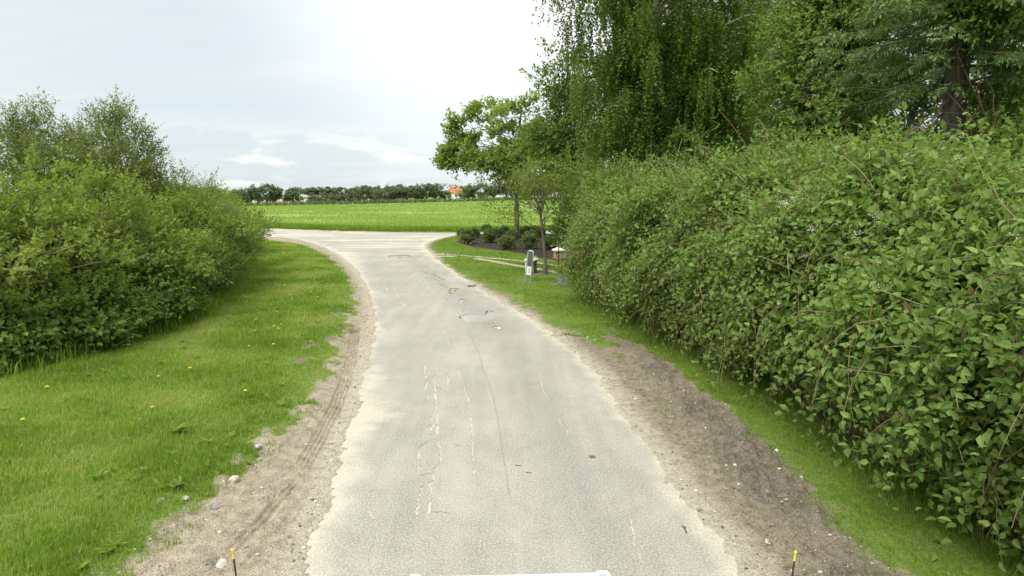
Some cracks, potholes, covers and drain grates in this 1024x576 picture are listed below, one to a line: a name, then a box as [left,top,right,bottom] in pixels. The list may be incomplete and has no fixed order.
crack [529,370,572,434]
crack [414,365,460,516]
